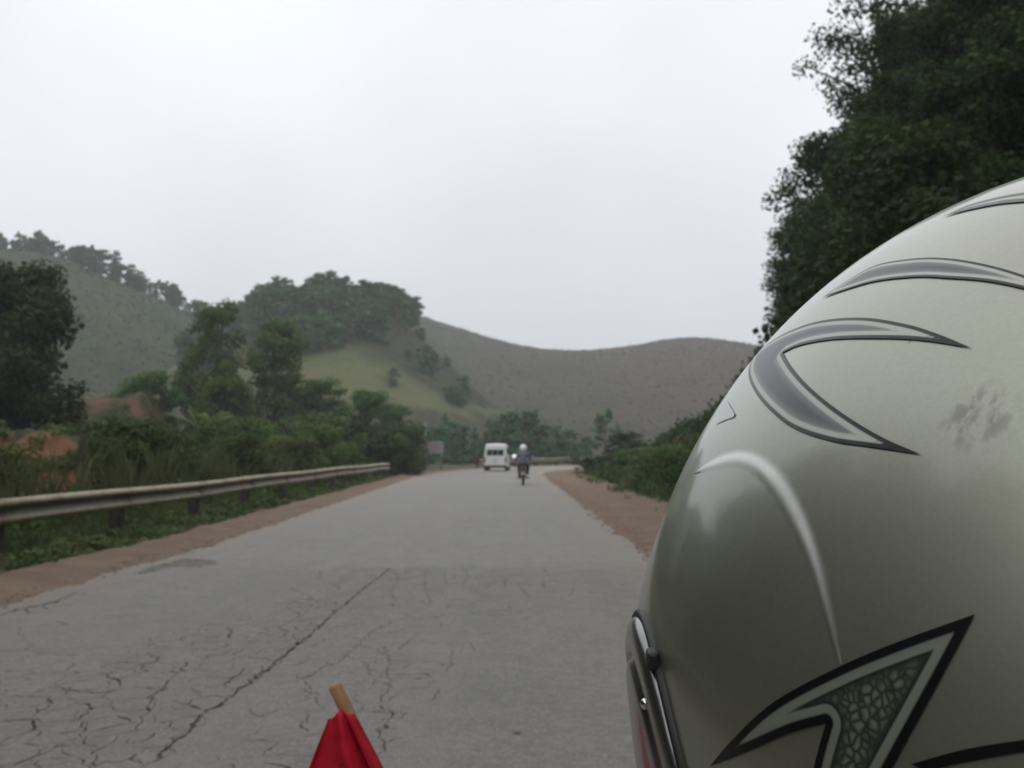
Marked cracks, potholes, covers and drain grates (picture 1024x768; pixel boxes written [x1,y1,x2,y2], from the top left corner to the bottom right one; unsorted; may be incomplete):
crack [0,568,576,768]
